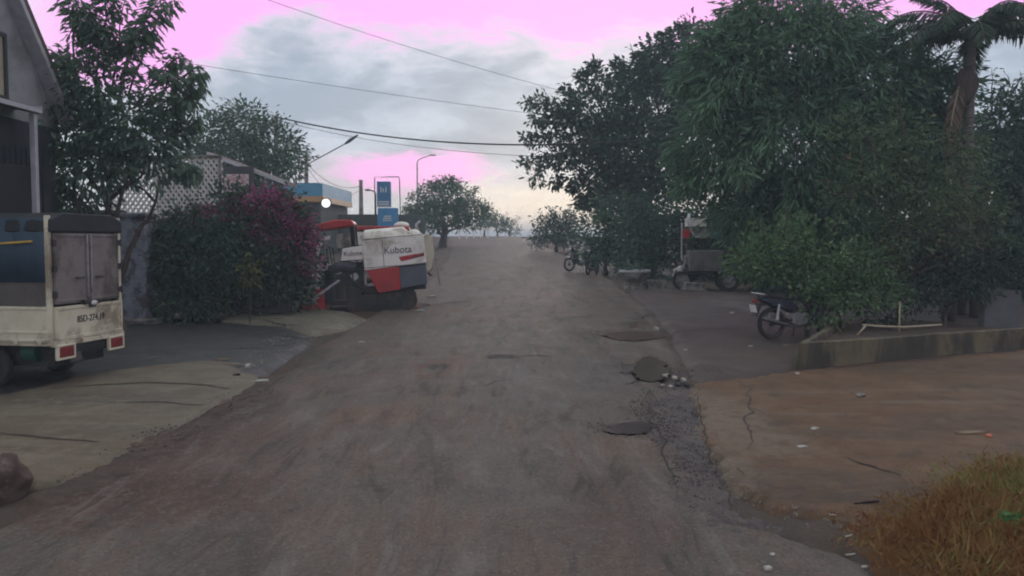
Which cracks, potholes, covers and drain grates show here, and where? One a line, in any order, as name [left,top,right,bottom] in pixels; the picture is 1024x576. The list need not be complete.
pothole [628,356,672,384]
pothole [603,421,660,436]
pothole [596,331,669,342]
crack [740,383,763,449]
crack [847,457,898,474]
